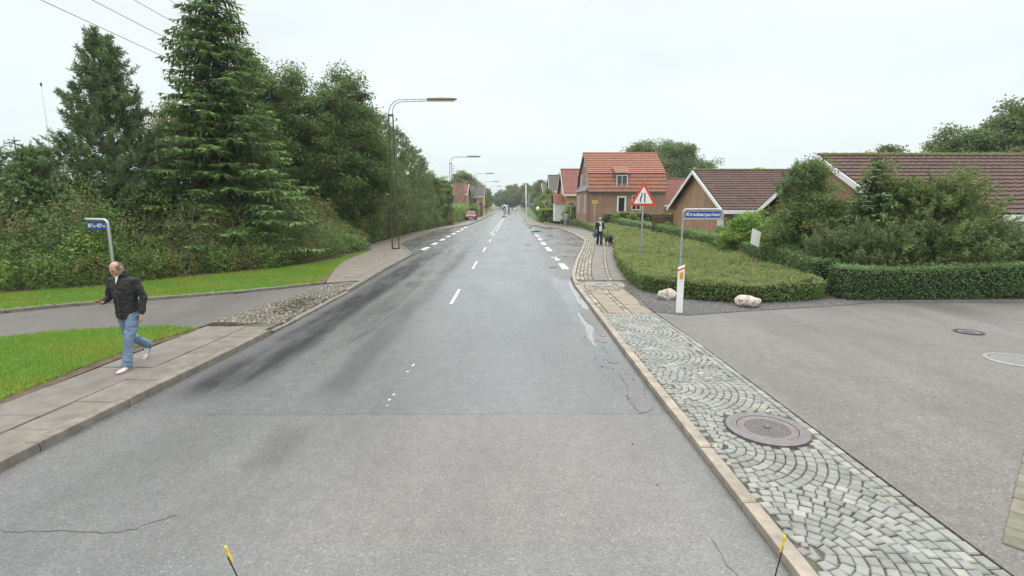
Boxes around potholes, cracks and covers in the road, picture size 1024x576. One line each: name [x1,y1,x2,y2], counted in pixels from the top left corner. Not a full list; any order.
crack [1,515,175,533]
manhole cover [725,412,812,449]
manhole cover [982,352,1024,367]
